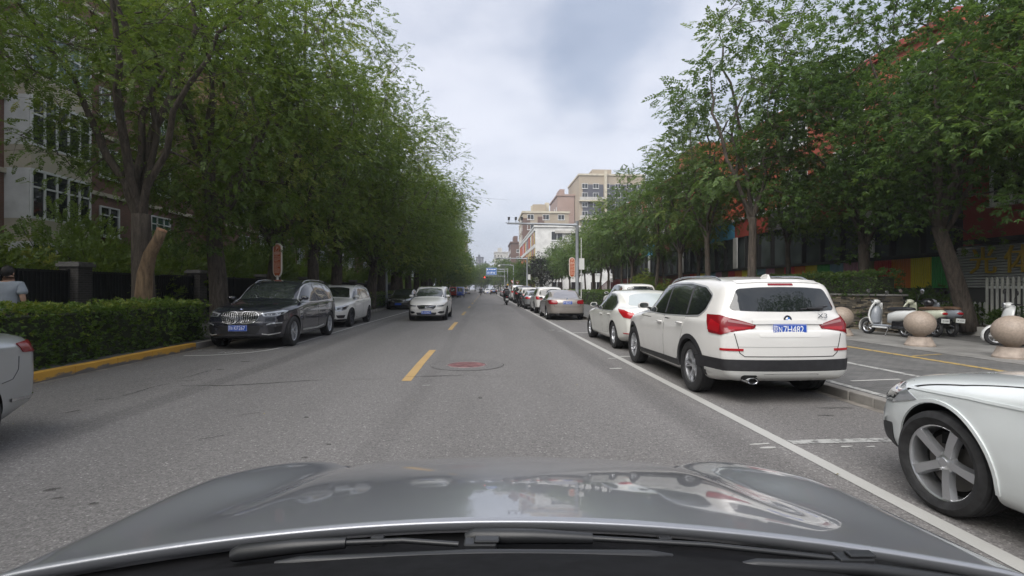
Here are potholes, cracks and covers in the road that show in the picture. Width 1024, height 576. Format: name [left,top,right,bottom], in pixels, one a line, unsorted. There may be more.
crack [179,373,307,386]
